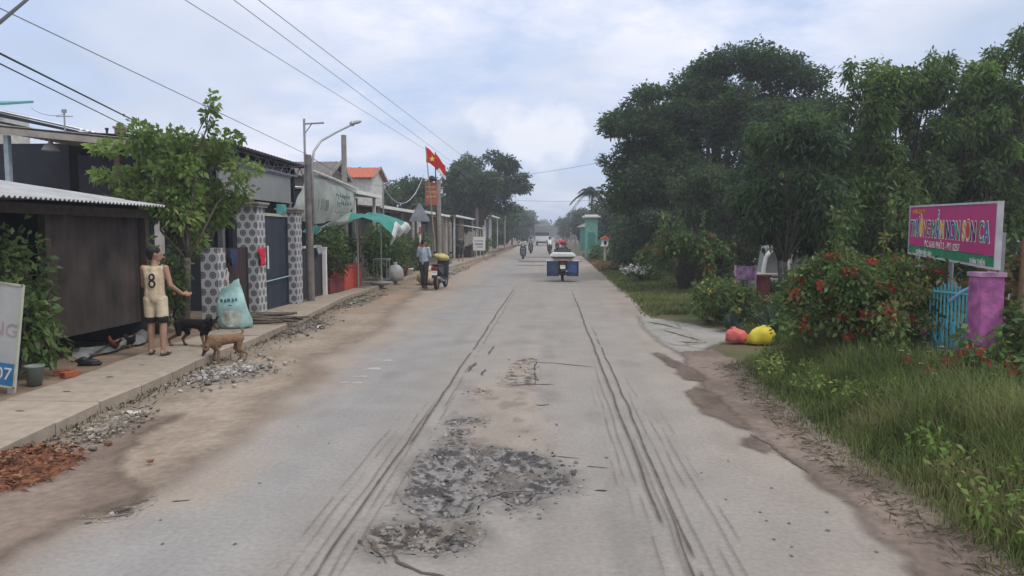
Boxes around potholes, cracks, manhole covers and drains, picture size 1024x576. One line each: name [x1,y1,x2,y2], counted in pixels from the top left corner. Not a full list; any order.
pothole [438,416,491,430]
pothole [343,513,486,564]
pothole [79,494,158,525]
crack [506,360,590,385]
crack [649,322,707,343]
pothole [385,443,588,527]
pothole [493,358,542,387]
pothole [433,428,482,450]
